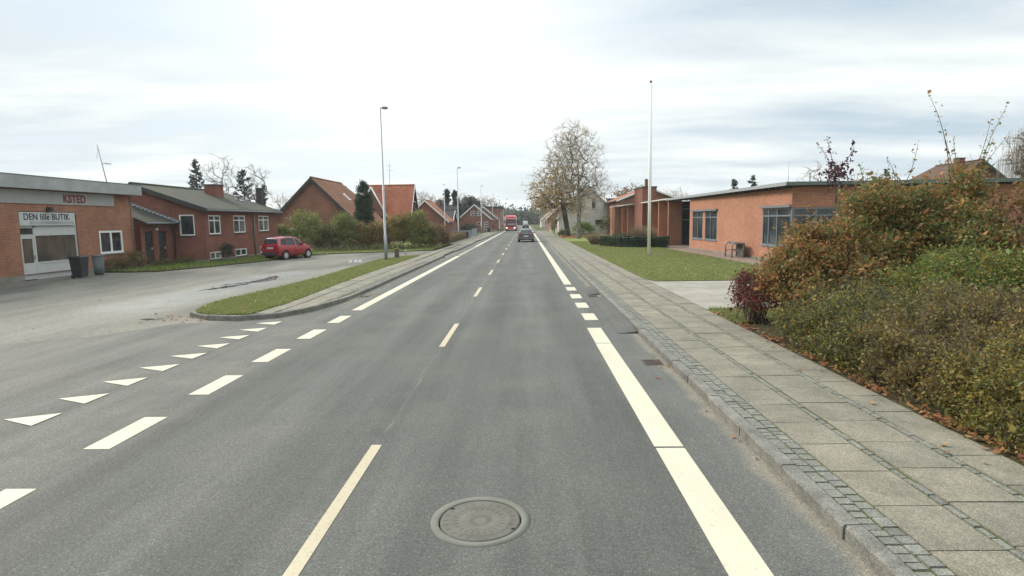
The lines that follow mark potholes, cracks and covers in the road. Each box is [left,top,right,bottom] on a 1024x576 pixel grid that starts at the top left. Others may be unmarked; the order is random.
manhole cover [430,497,530,548]
